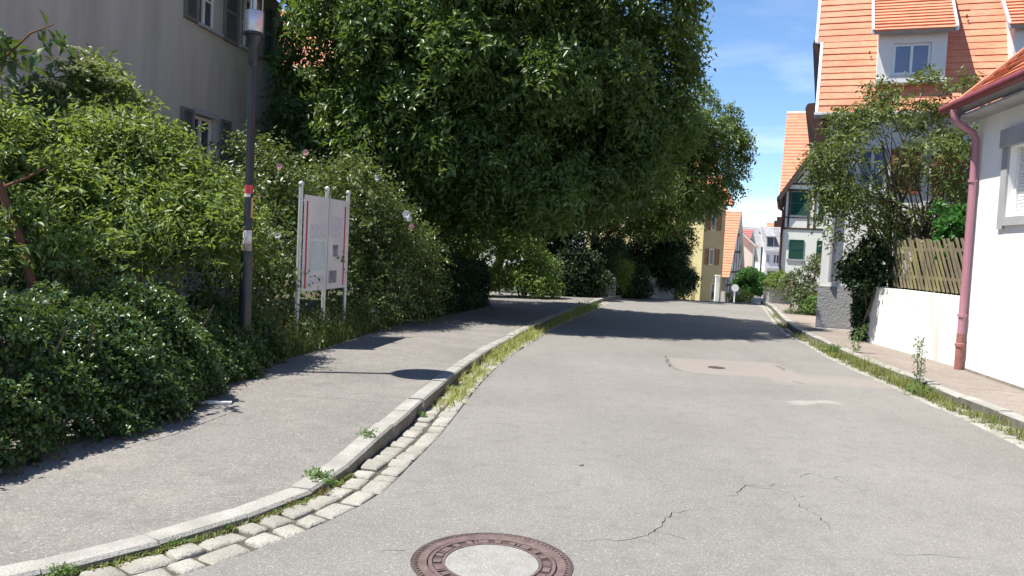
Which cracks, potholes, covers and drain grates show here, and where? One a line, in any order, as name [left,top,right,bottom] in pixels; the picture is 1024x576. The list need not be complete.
manhole cover [411,533,573,576]
crack [578,509,696,546]
crack [736,483,831,531]
